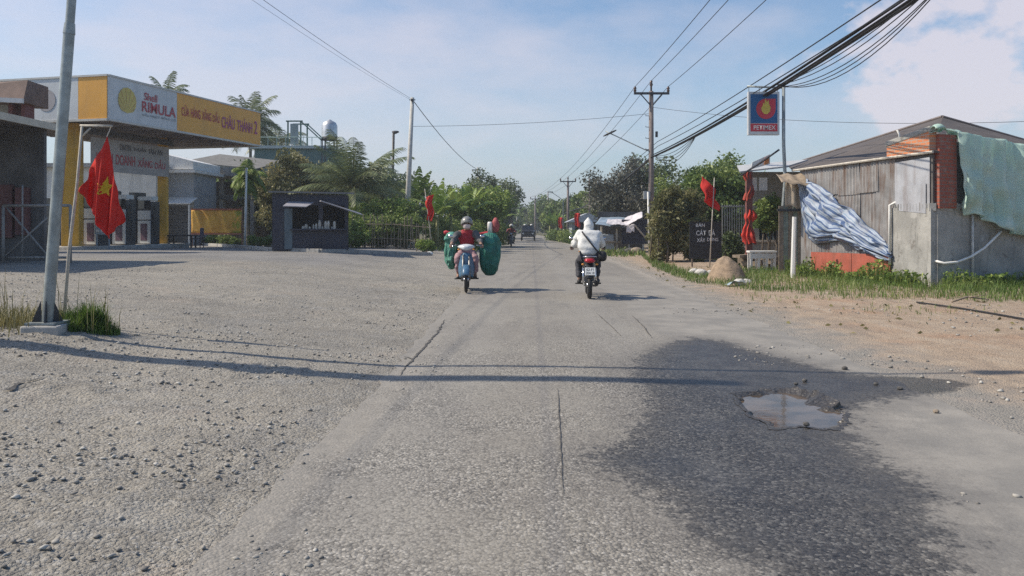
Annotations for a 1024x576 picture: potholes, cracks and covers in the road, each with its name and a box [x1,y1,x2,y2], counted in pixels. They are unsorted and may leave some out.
crack [401,320,444,374]
pothole [730,387,852,431]
